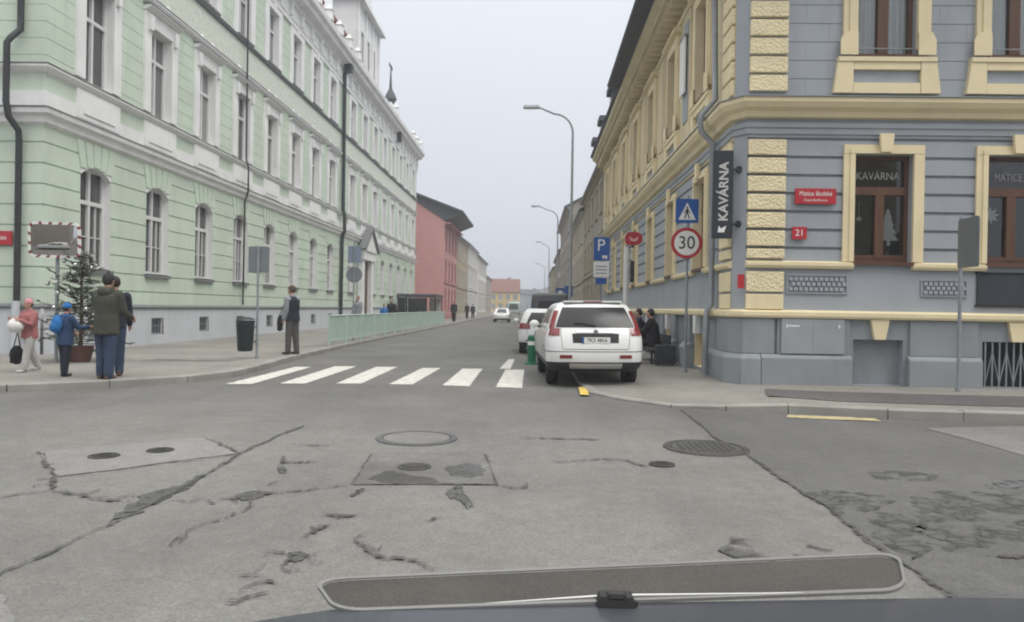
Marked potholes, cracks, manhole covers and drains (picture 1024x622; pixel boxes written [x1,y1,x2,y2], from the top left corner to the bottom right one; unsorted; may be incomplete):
crack [558,458,647,466]
pothole [445,484,473,509]
crack [799,471,1024,559]
crack [1,451,136,501]
manhole cover [663,439,750,456]
crack [169,443,364,545]
manhole cover [375,431,458,446]
manhole cover [397,462,431,471]
crack [224,513,433,603]
